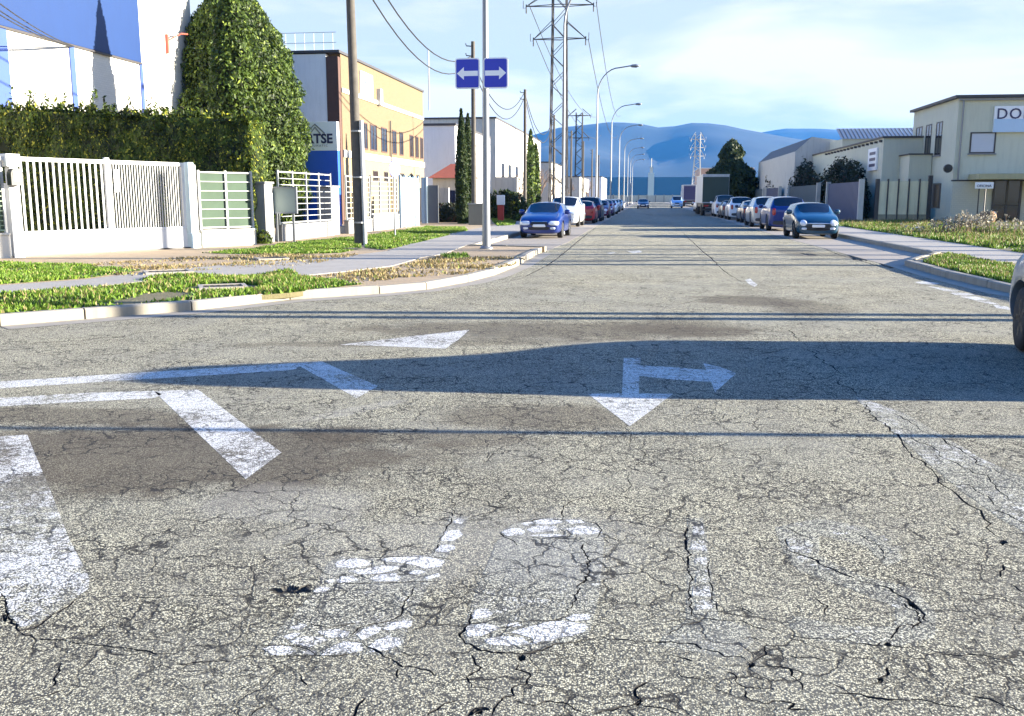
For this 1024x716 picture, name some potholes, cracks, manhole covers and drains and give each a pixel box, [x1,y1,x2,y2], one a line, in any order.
pothole [268,584,313,596]
crack [352,698,365,716]
crack [343,508,453,562]
crack [0,573,447,706]
crack [427,441,1024,716]
crack [755,330,1024,618]
